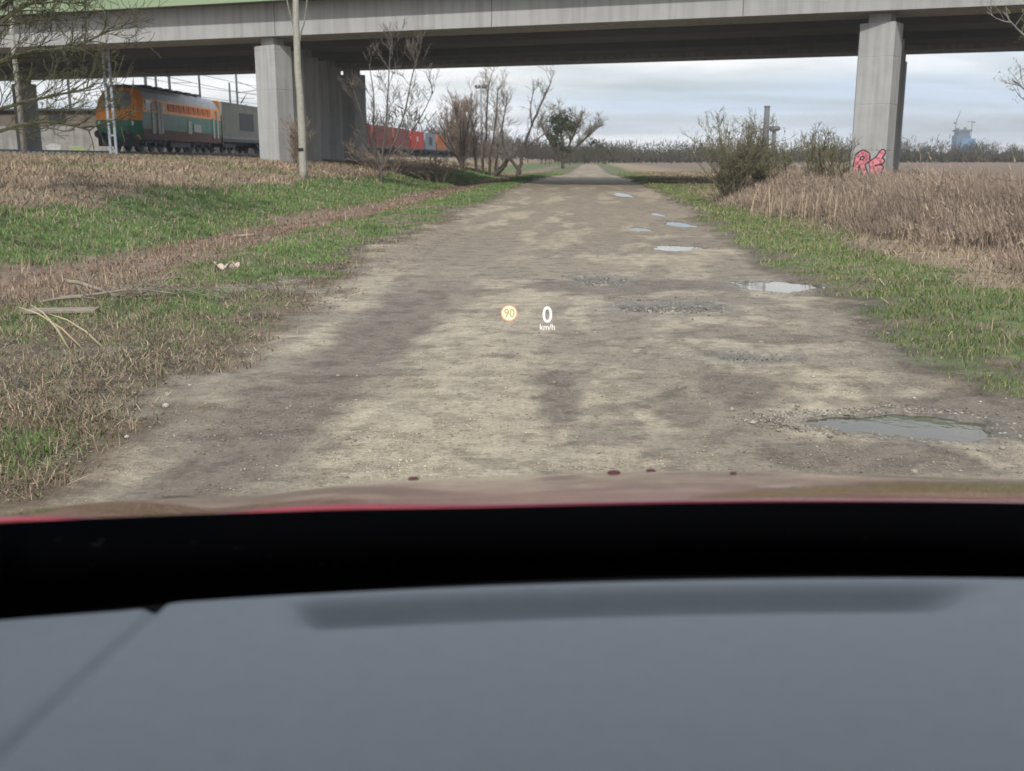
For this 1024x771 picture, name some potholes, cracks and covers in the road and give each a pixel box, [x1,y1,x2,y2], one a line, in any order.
pothole [643,244,718,252]
pothole [560,274,641,291]
pothole [595,296,747,319]
pothole [657,220,702,228]
pothole [681,347,808,367]
pothole [718,278,836,295]
pothole [704,402,1024,451]
